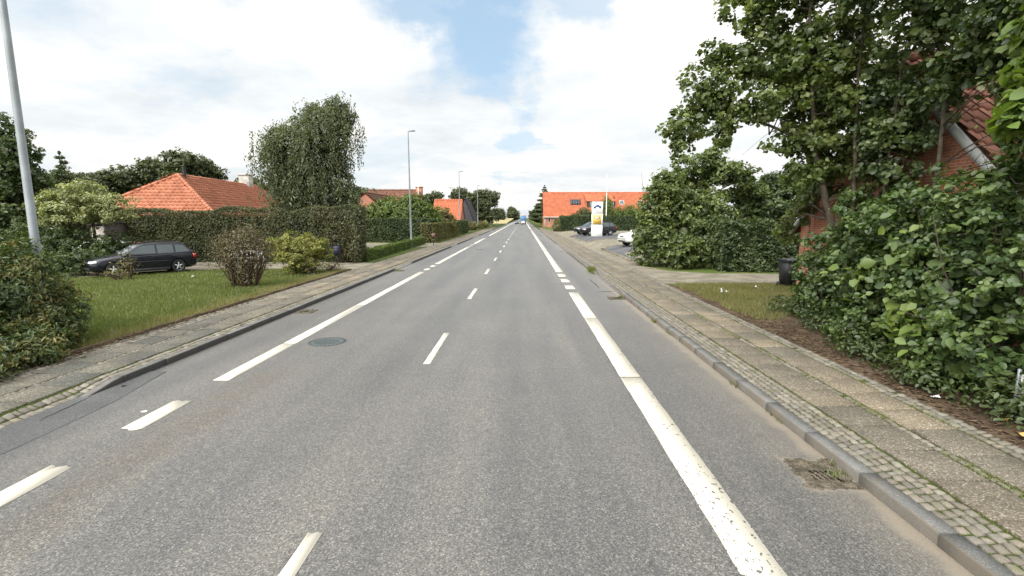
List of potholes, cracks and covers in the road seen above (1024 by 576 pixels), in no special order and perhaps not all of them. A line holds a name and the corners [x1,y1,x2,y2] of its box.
manhole cover [308,337,347,347]
